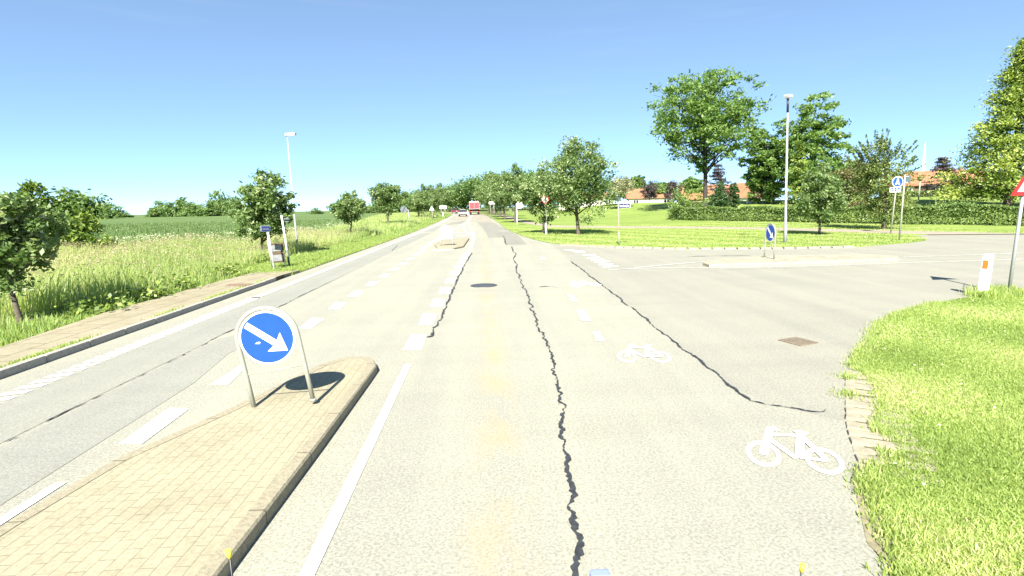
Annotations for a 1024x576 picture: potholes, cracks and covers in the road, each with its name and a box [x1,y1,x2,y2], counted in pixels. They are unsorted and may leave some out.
crack [571,261,828,412]
crack [503,236,585,576]
crack [427,253,472,337]
